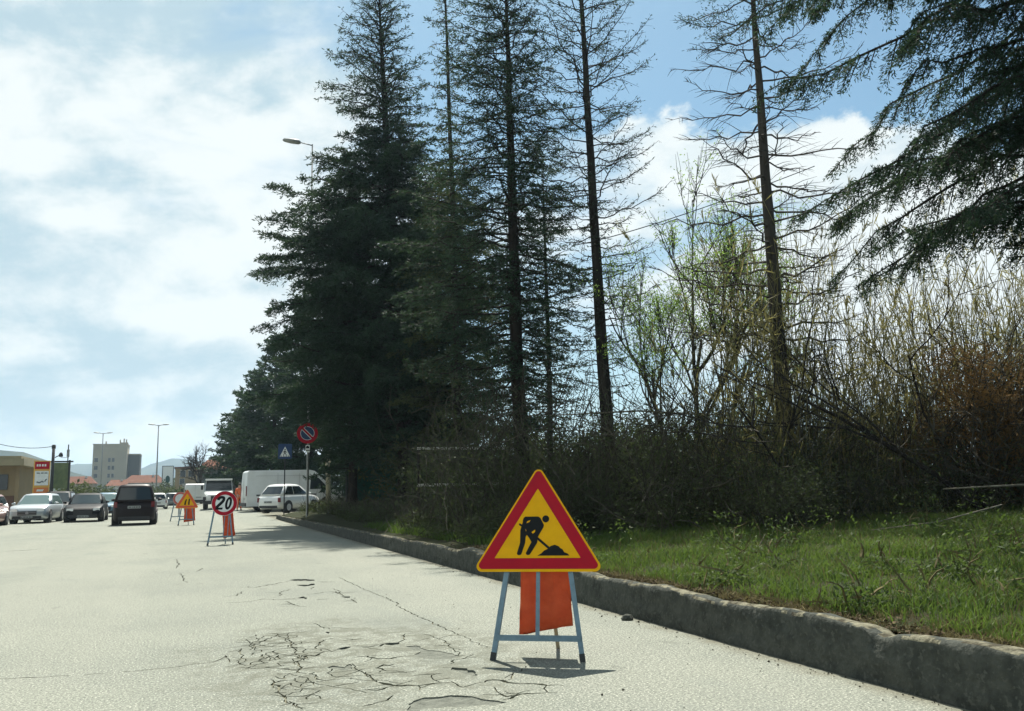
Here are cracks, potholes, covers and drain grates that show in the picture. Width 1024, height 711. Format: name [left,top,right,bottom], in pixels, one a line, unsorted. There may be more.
crack [225,581,357,607]
crack [11,623,564,709]
